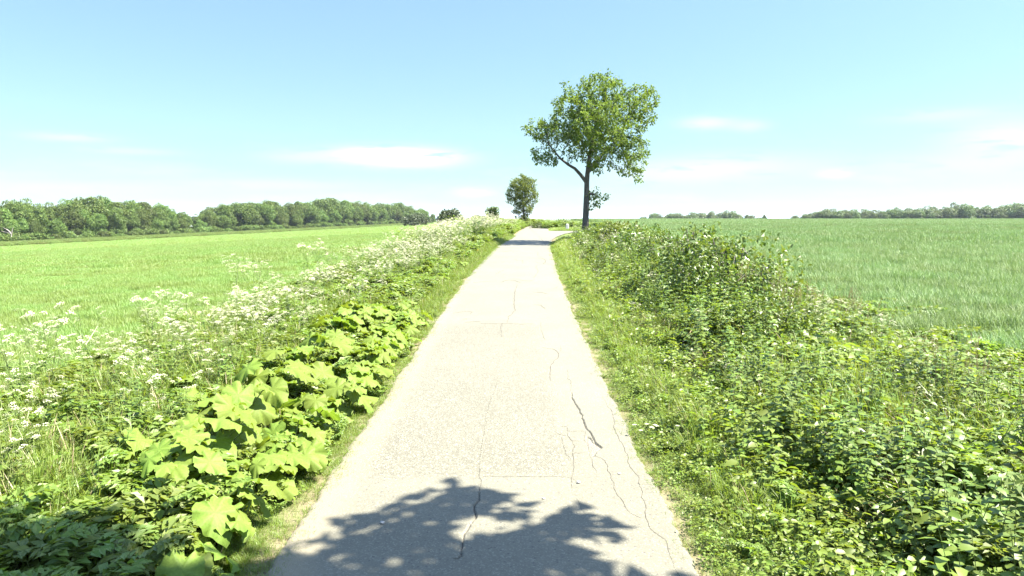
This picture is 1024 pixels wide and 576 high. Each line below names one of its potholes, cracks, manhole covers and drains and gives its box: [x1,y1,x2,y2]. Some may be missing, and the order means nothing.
crack [461,332,678,573]
